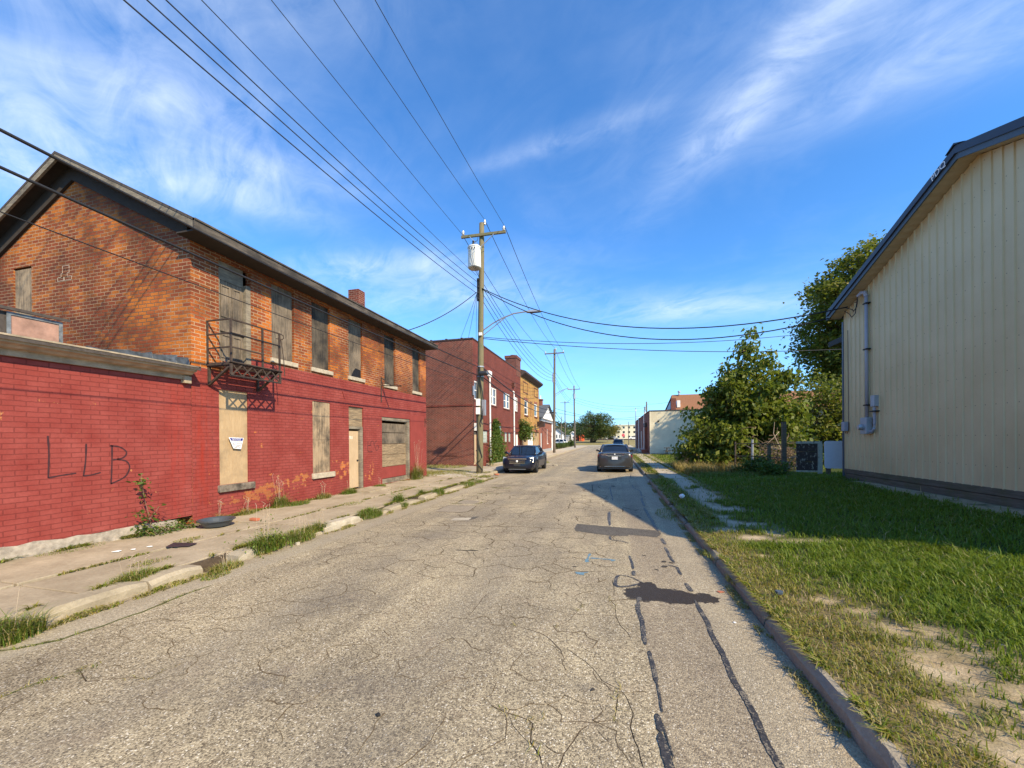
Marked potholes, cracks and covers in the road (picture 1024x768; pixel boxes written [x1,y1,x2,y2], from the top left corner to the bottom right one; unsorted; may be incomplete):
crack [319,476,645,768]
